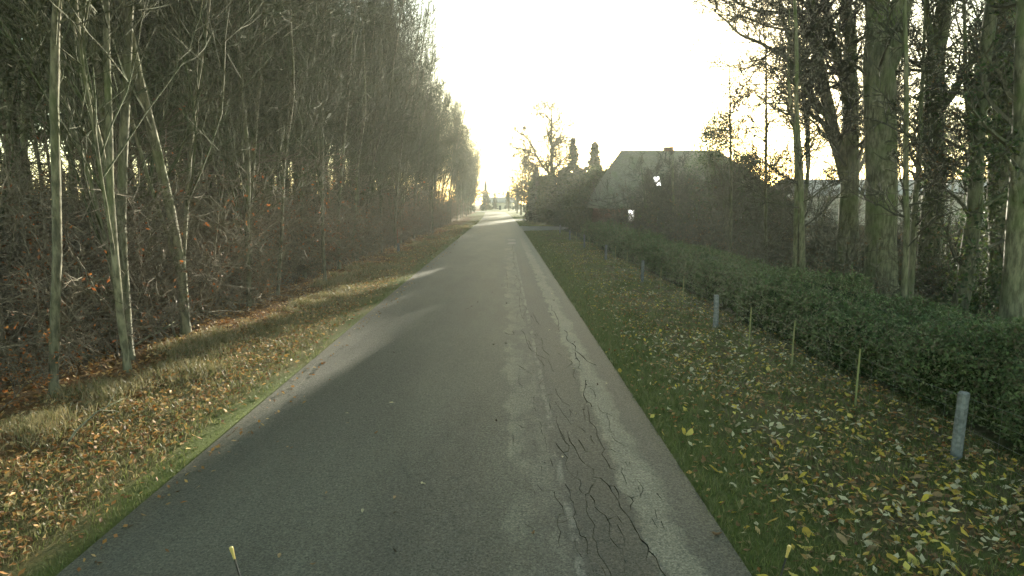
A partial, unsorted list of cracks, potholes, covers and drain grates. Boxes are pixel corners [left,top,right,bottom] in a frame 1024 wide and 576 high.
crack [506,246,666,576]
